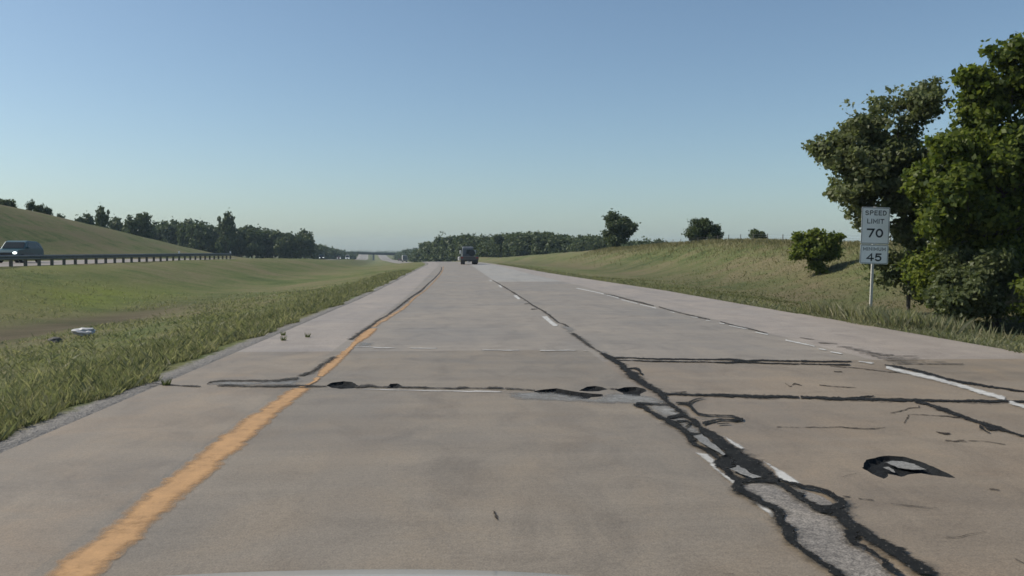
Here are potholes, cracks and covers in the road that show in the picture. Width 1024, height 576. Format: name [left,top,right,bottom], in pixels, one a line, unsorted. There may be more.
pothole [615,387,646,396]
pothole [327,381,358,389]
pothole [862,456,955,479]
crack [778,405,1002,444]
pothole [534,388,603,399]
